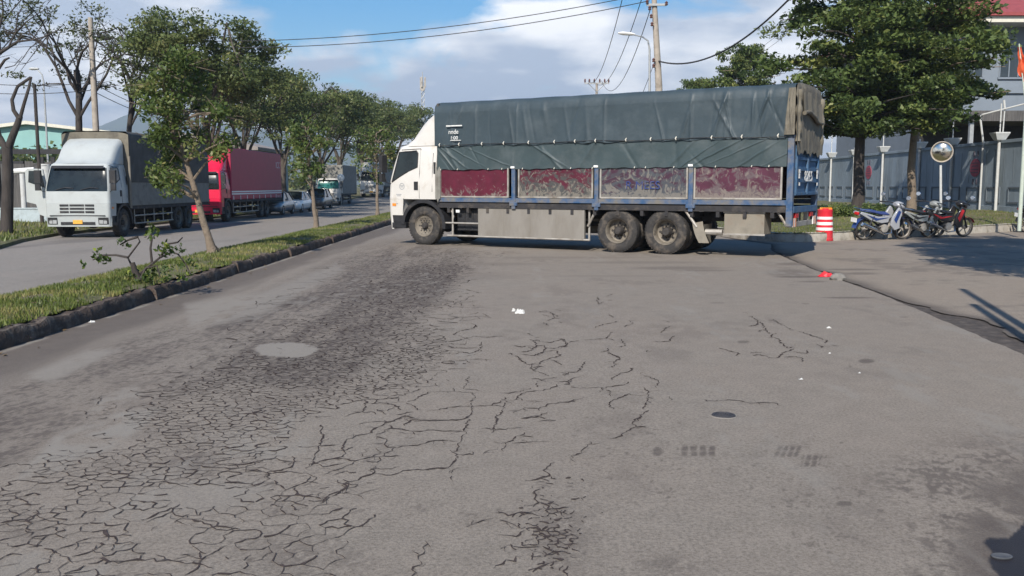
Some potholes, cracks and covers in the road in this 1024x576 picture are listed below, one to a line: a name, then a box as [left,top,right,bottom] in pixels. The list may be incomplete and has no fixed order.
crack [479,310,585,453]
crack [571,315,673,438]
crack [0,248,503,576]
crack [466,462,603,576]
crack [720,316,836,361]
